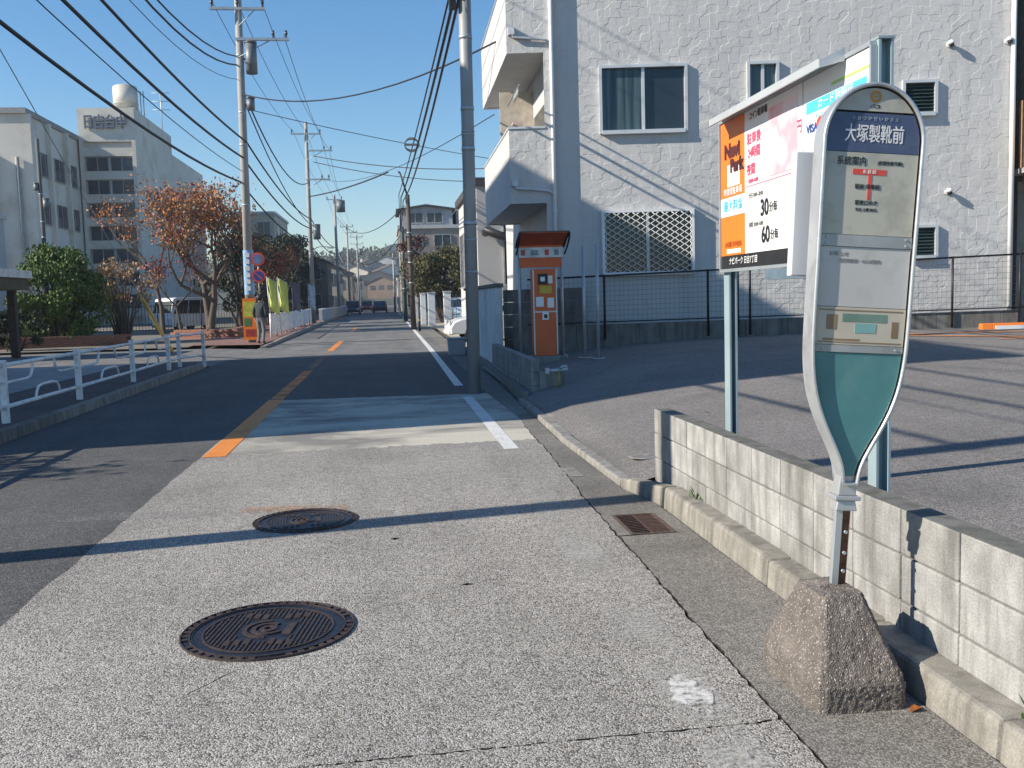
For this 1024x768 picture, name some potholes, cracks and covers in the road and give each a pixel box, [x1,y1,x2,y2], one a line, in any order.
manhole cover [179,601,355,662]
manhole cover [252,508,357,533]
drain grate [611,513,677,537]
